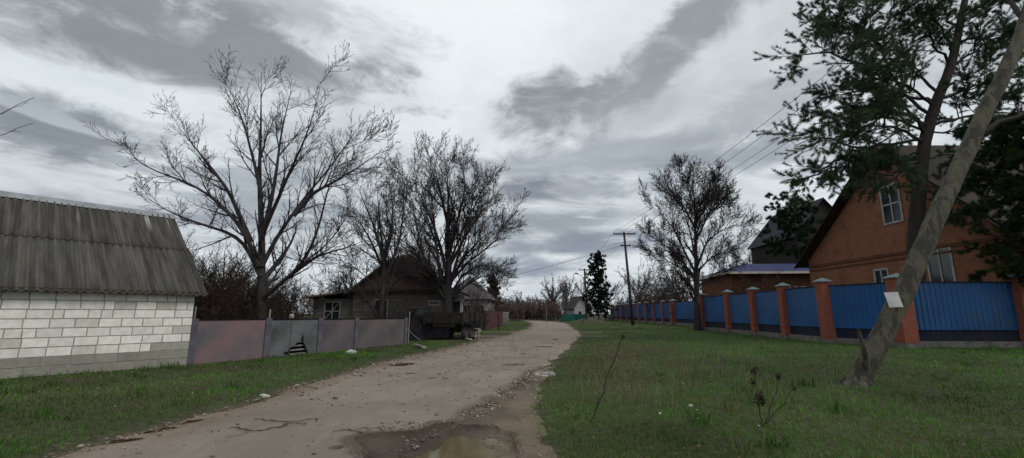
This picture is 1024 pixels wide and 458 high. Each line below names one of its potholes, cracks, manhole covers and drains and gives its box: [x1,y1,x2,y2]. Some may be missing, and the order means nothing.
pothole [351,421,523,458]
crack [227,418,383,438]
